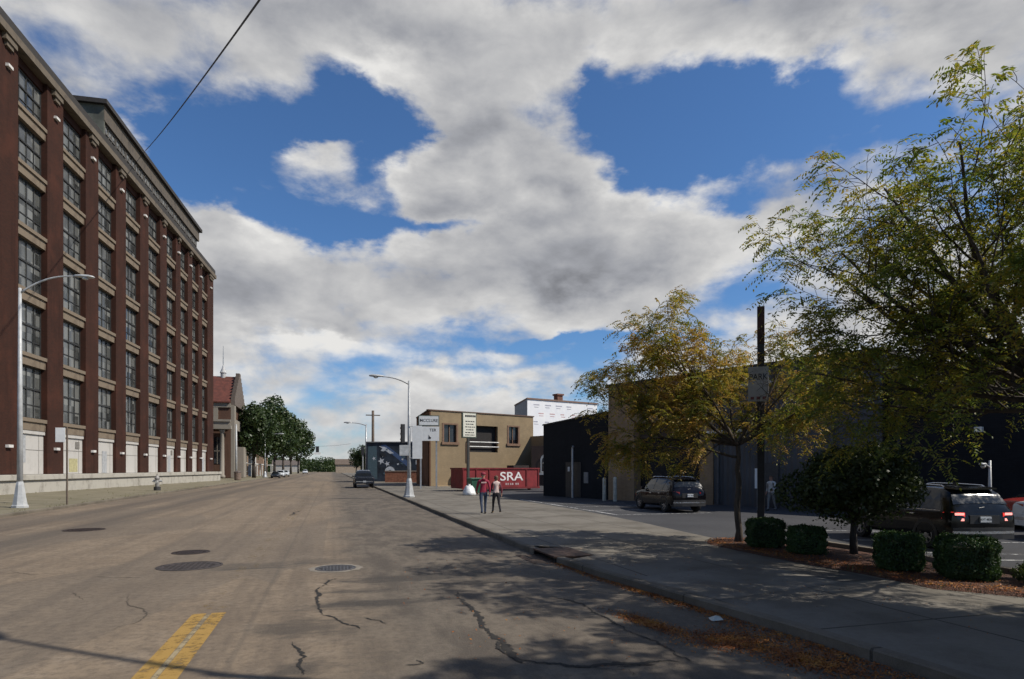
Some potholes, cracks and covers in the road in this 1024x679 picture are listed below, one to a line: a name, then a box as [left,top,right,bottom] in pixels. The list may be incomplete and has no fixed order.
manhole cover [155,561,223,571]
crack [455,592,698,673]
crack [315,578,384,628]
crack [292,642,307,676]
manhole cover [308,564,364,572]
drain grate [516,547,592,564]
